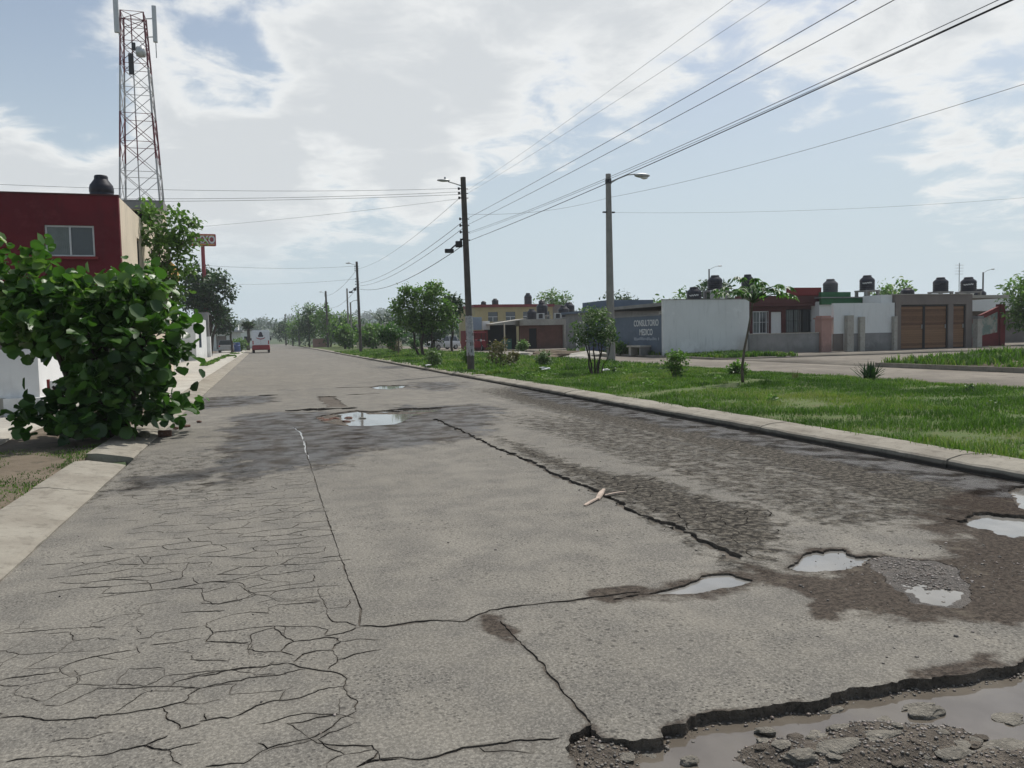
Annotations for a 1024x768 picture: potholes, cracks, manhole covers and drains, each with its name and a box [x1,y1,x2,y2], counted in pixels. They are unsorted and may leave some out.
pothole [316,408,441,426]
pothole [613,573,753,600]
crack [0,466,639,768]
pothole [866,556,972,608]
pothole [787,549,881,572]
pothole [565,660,1024,768]
pothole [946,511,1024,538]
crack [433,419,779,560]
